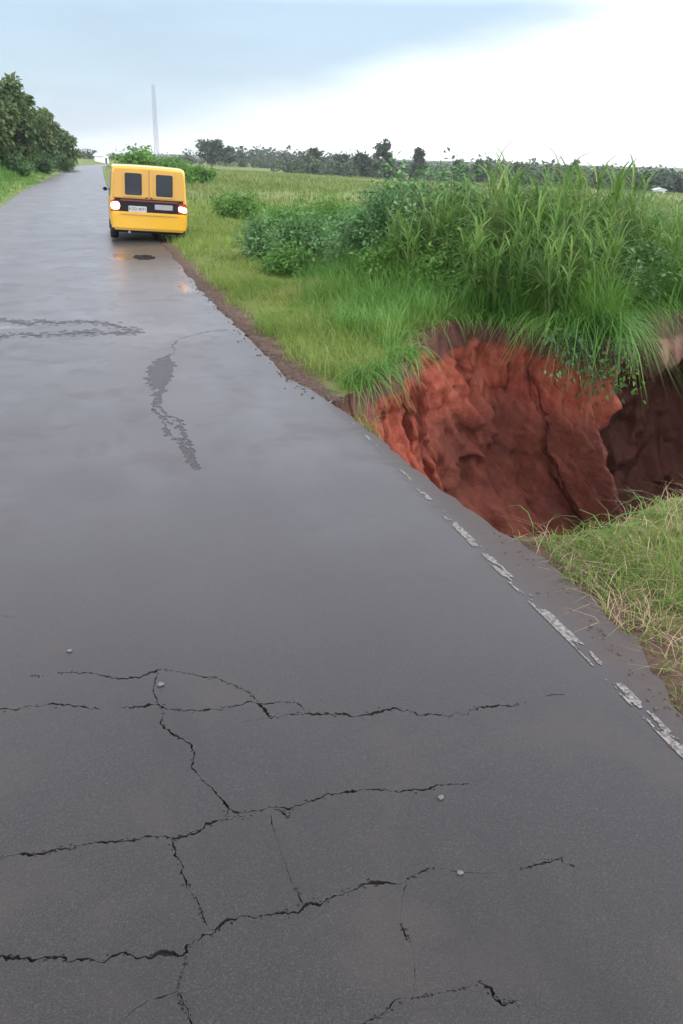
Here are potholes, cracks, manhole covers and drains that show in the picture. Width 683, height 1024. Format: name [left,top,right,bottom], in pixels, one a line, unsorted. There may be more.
crack [0,318,146,339]
crack [363,980,519,1024]
crack [143,330,220,470]
